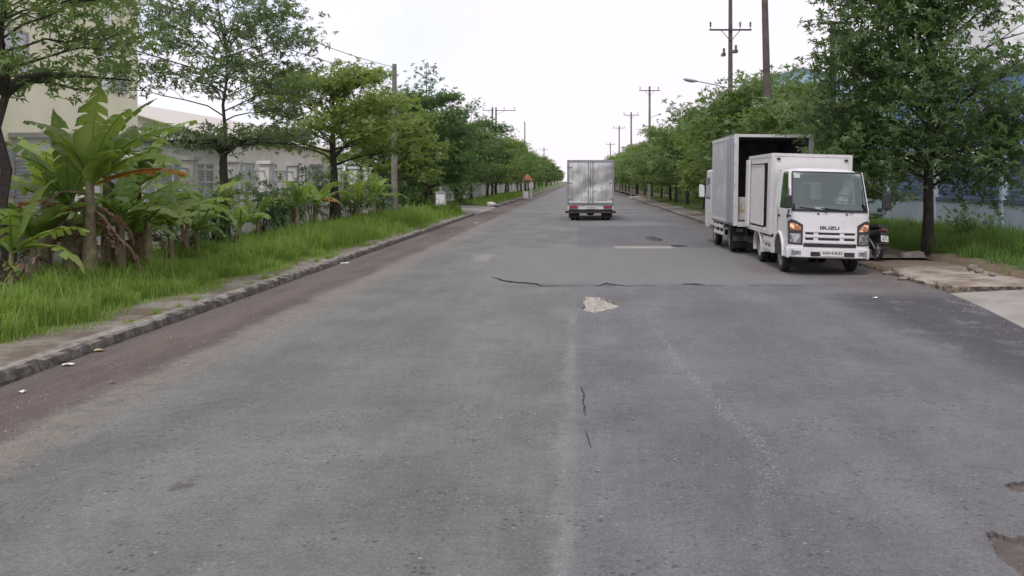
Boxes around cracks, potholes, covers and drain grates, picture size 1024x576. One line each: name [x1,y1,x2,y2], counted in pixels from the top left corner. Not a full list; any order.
pothole [582,297,620,313]
crack [493,277,545,286]
pothole [1004,481,1024,493]
crack [581,387,591,448]
pothole [985,531,1024,576]
